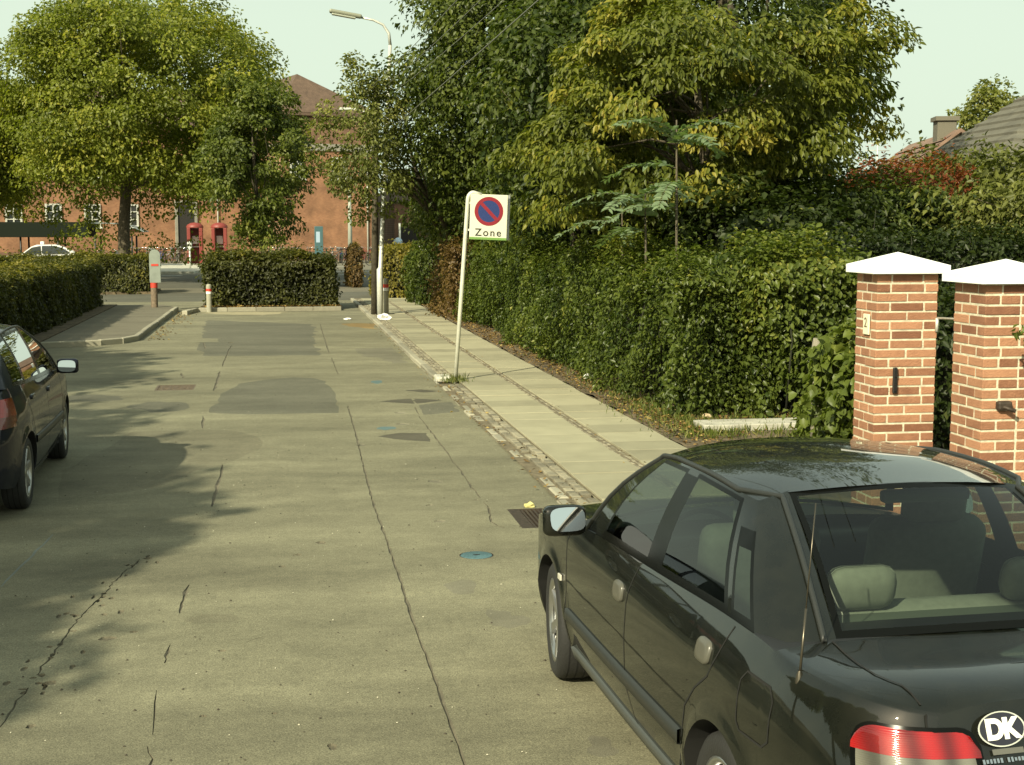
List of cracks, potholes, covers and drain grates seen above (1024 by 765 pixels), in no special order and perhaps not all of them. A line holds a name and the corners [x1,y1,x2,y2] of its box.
crack [211,465,223,507]
crack [179,585,189,613]
crack [147,691,157,765]
crack [347,406,467,765]
crack [0,559,140,727]
manhole cover [459,551,494,559]
drain grate [507,508,543,528]
